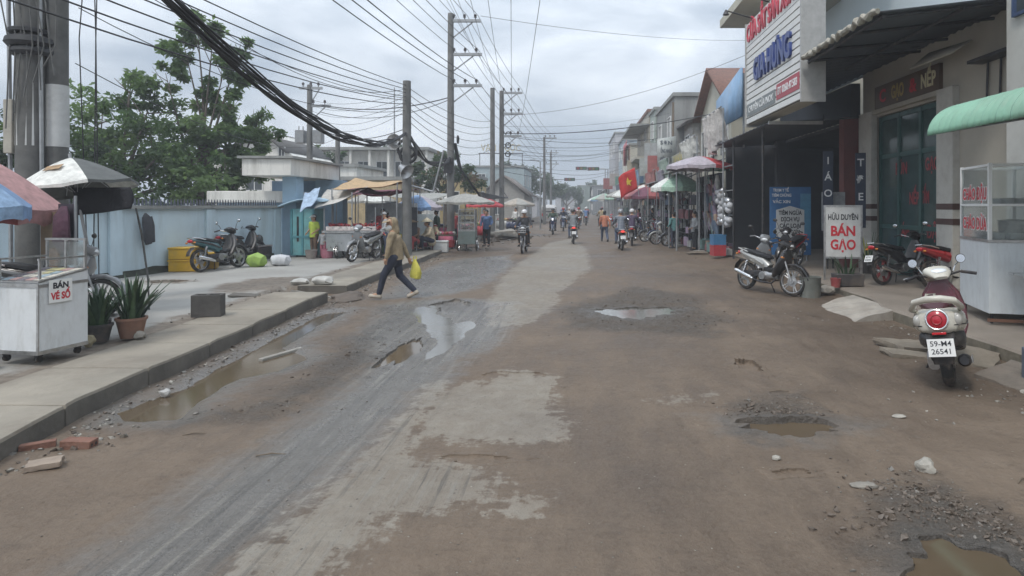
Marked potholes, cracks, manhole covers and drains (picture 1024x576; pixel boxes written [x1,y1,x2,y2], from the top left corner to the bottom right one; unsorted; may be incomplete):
pothole [717,414,857,442]
pothole [419,297,477,315]
pothole [878,522,1024,576]
pothole [578,305,697,322]
pothole [358,334,429,375]
